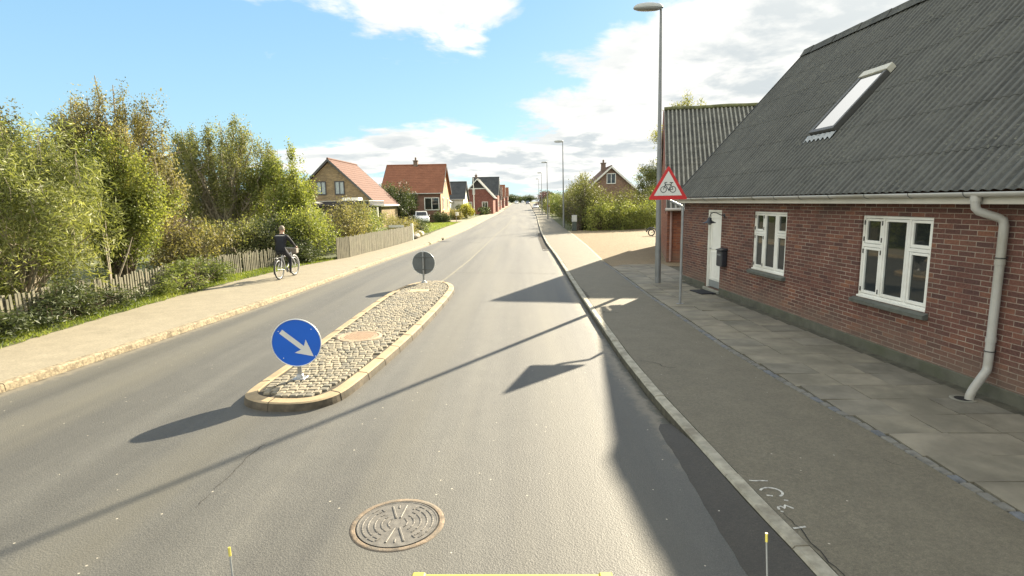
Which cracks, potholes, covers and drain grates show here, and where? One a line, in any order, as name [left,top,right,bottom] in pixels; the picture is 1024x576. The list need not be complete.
crack [785,515,845,576]
manhole cover [349,499,445,552]
manhole cover [335,331,382,342]
